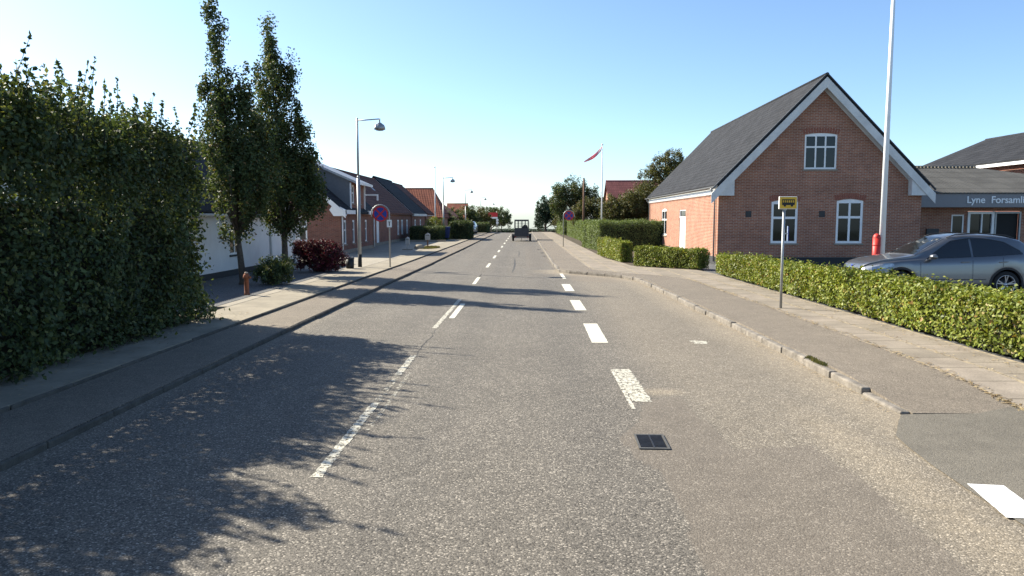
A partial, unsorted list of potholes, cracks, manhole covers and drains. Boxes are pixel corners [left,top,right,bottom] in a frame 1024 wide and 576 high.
drain grate [634,434,671,450]
